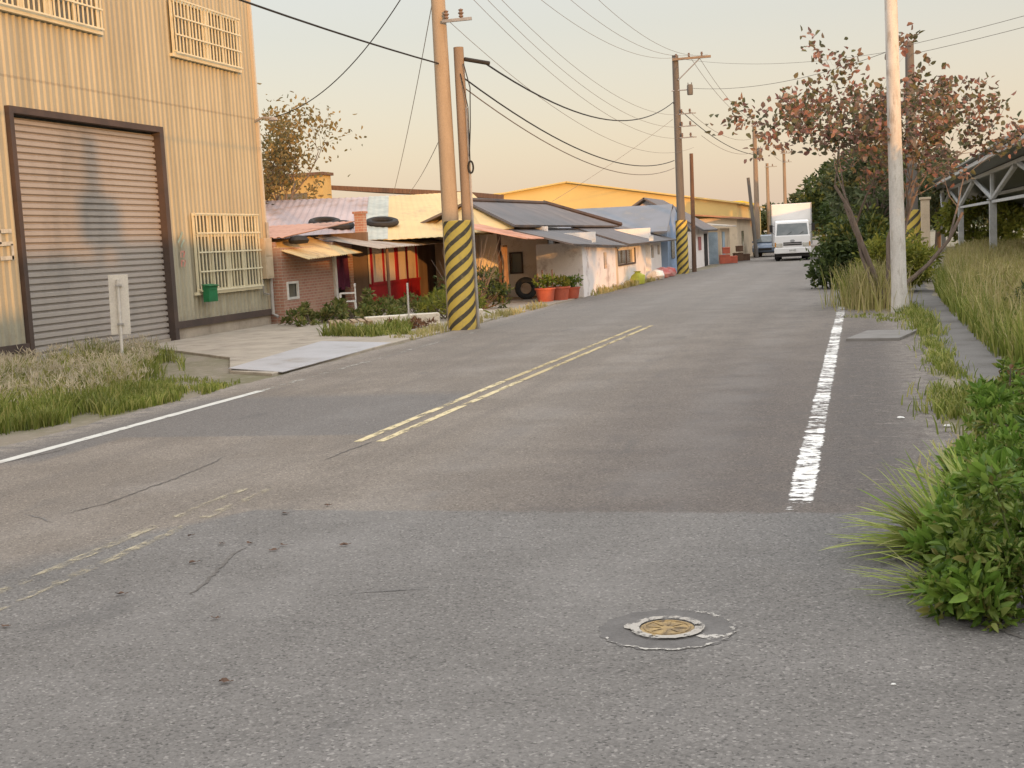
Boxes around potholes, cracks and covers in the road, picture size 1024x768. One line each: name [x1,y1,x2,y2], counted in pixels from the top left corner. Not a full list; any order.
manhole cover [598,609,738,651]
crack [190,548,244,595]
crack [70,458,220,513]
